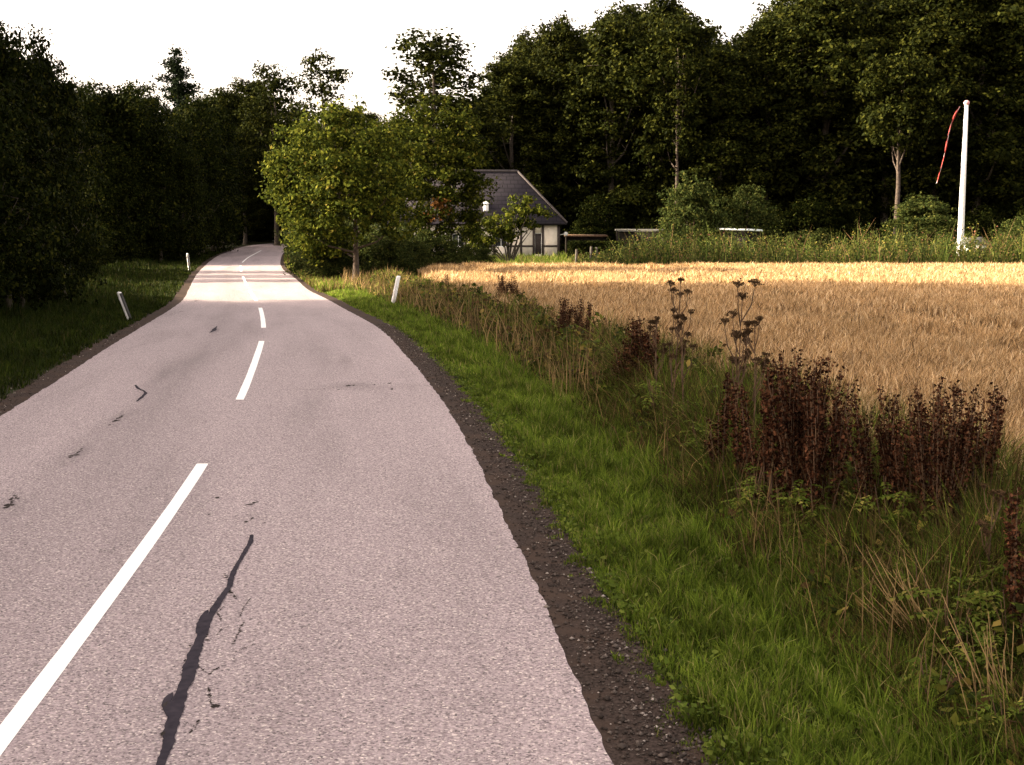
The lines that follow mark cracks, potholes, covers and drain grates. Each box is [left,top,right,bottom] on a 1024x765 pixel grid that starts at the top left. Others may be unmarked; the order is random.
crack [3,495,19,509]
